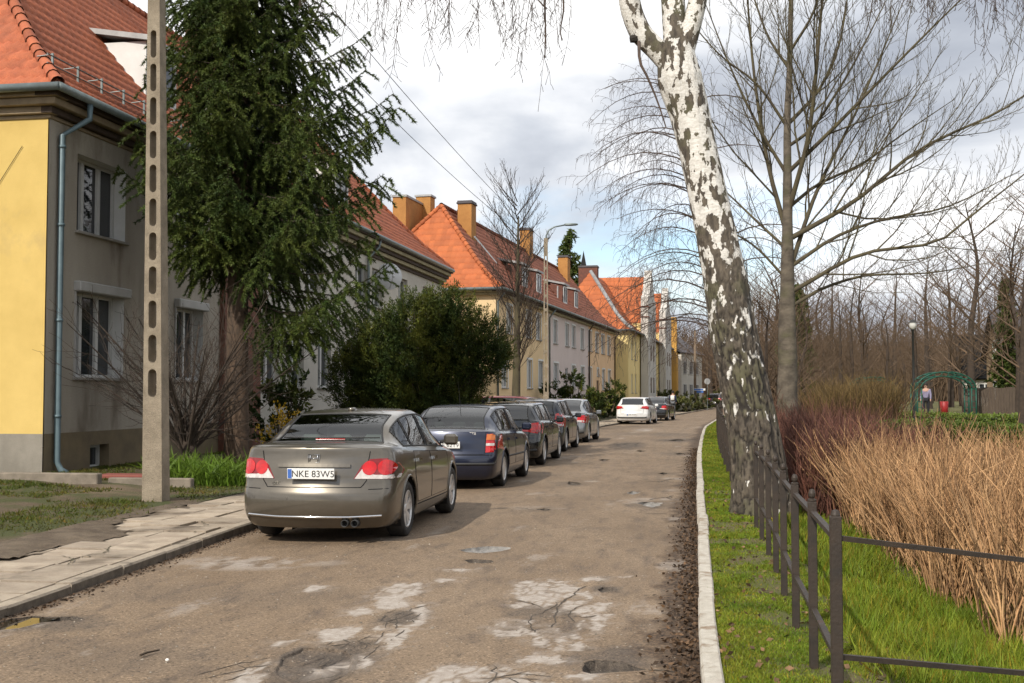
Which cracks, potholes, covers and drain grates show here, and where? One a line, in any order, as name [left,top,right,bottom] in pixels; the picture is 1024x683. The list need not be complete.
pothole [457,546,514,554]
pothole [577,659,651,675]
pothole [0,615,90,631]
crack [519,586,596,632]
crack [297,605,427,683]
